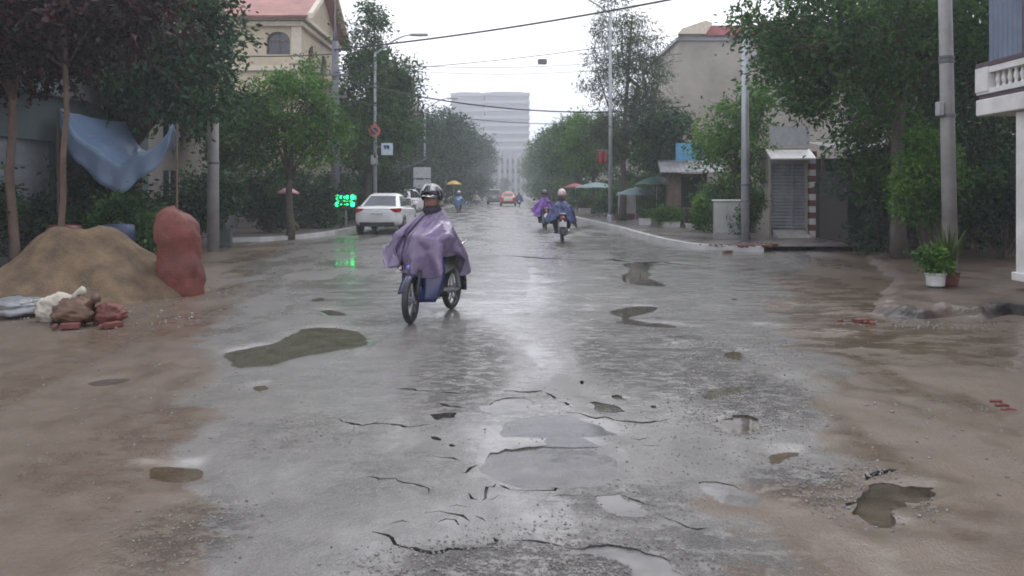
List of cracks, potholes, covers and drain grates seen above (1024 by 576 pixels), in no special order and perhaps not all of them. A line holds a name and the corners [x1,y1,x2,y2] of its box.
crack [338,388,467,427]
pothole [714,415,758,433]
pothole [851,480,936,528]
pothole [590,402,626,413]
crack [502,390,668,446]
crack [372,456,706,555]
